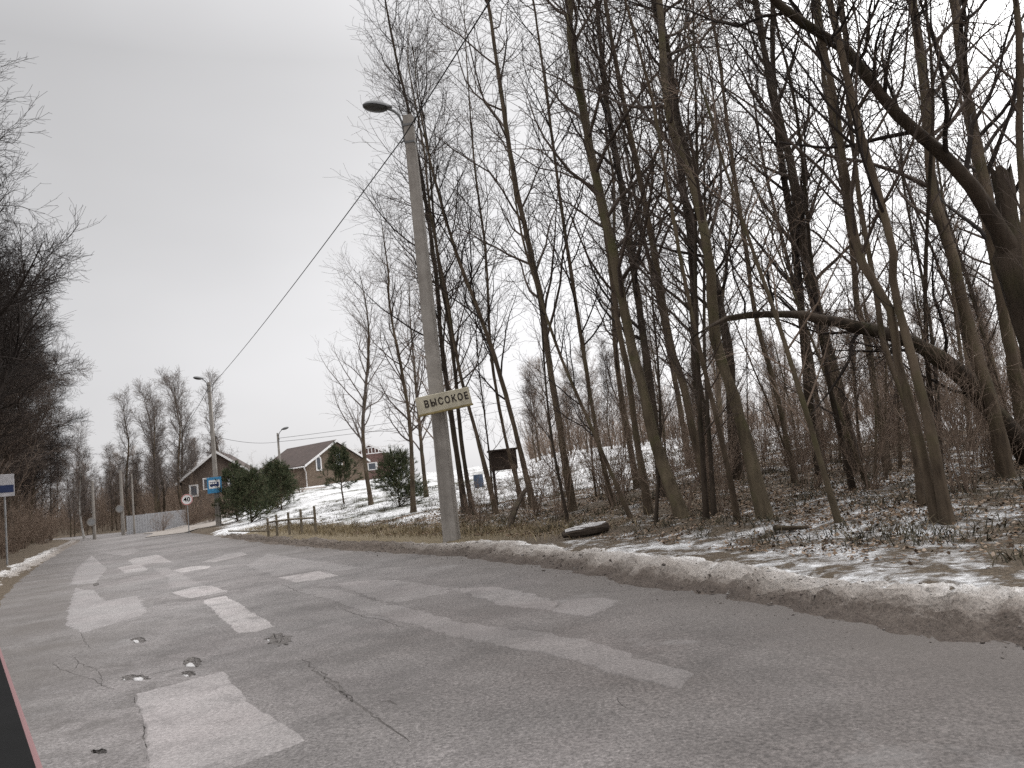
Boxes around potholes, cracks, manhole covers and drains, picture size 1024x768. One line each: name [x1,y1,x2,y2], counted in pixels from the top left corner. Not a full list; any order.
pothole [264,633,292,646]
pothole [183,657,202,667]
crack [302,659,409,741]
crack [53,634,113,689]
